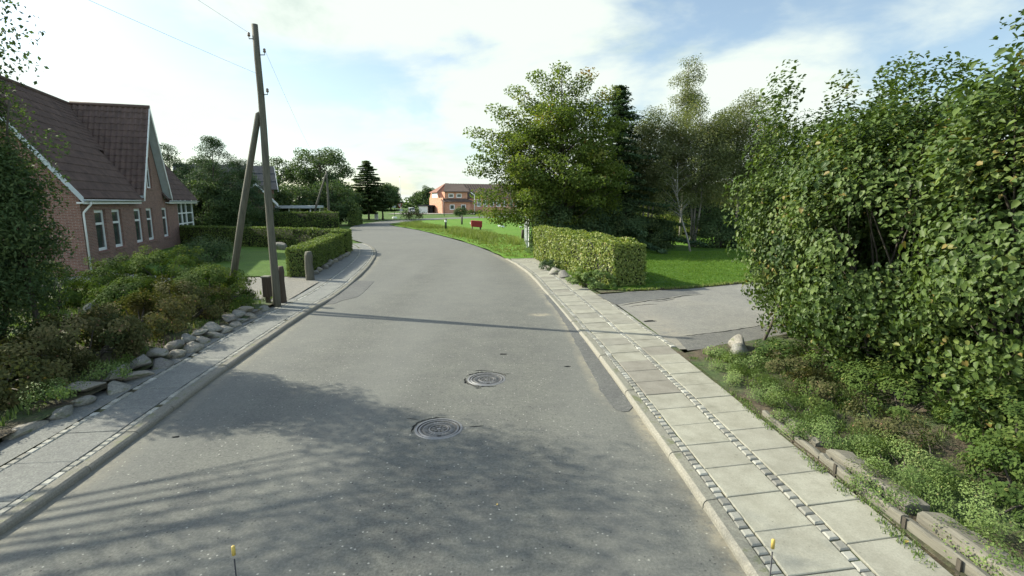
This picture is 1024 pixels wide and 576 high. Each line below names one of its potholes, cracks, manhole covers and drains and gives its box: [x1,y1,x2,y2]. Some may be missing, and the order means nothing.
manhole cover [467,373,506,386]
manhole cover [414,418,463,440]
